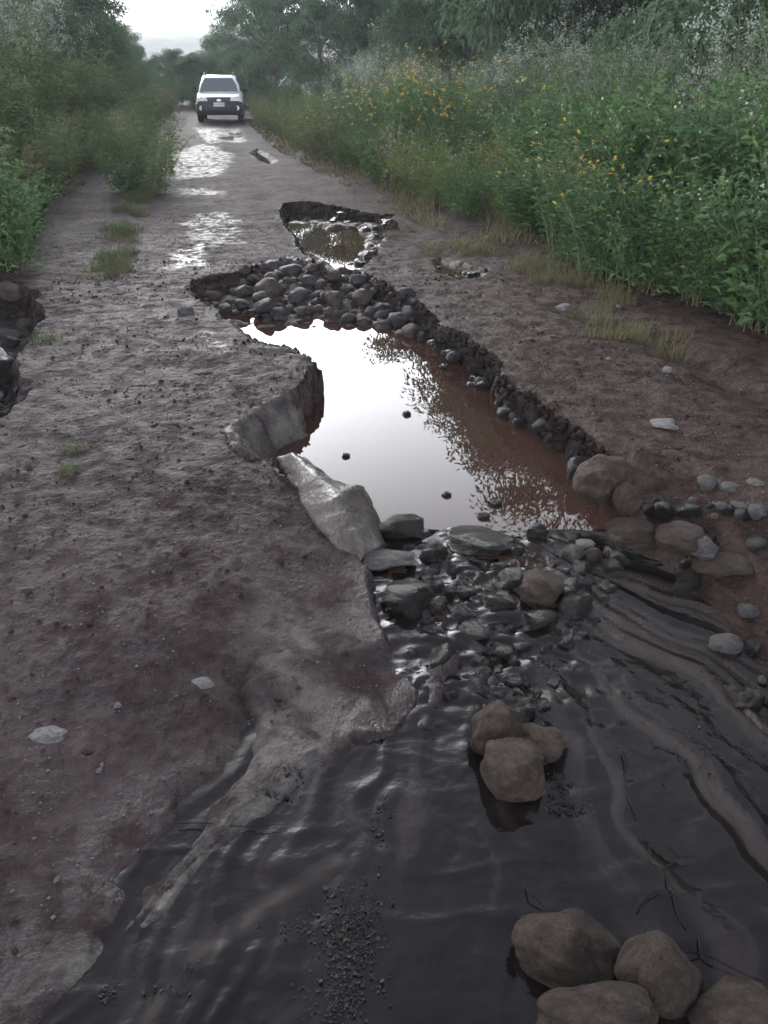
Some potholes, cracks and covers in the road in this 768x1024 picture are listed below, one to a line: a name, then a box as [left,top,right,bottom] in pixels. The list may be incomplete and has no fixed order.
pothole [277,201,397,287]
pothole [0,278,49,418]
pothole [248,148,278,163]
pothole [186,256,658,585]
